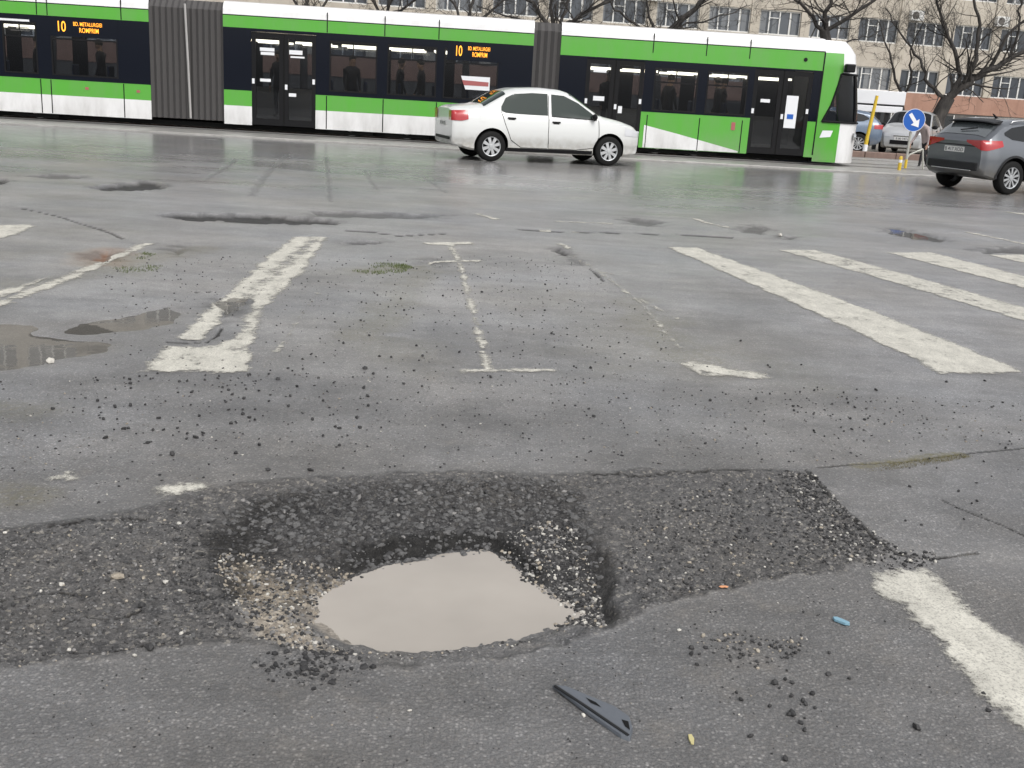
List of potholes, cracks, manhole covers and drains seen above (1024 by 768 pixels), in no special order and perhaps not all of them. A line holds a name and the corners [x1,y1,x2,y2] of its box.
pothole [159,211,343,225]
pothole [211,294,253,319]
pothole [881,226,955,242]
pothole [185,472,626,668]
pothole [311,210,443,219]
crack [97,228,126,239]
pothole [87,179,170,191]
